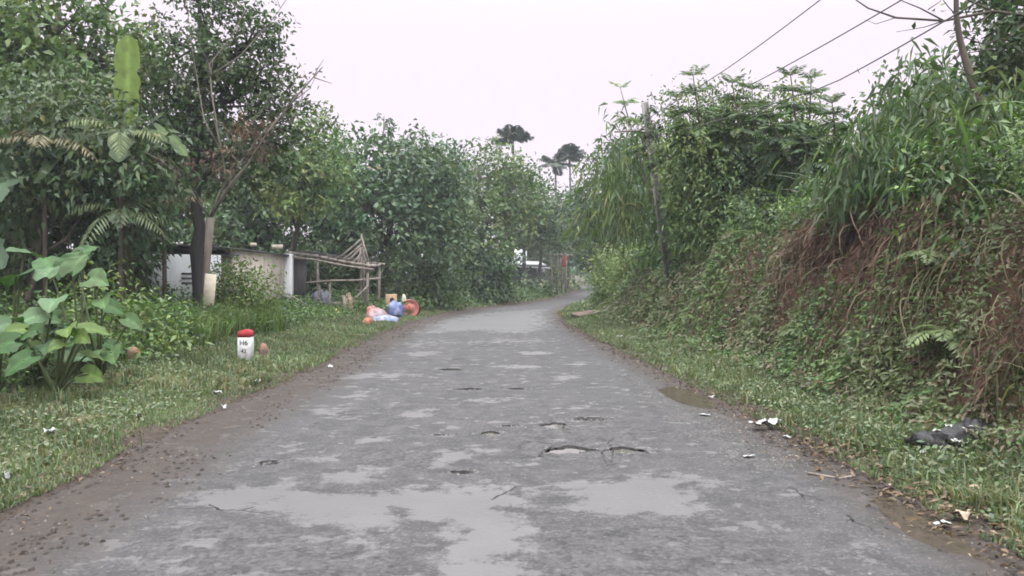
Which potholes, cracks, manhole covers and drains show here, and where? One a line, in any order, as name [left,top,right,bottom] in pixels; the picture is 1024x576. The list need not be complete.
pothole [602,444,658,456]
pothole [536,444,610,457]
crack [846,515,876,533]
pothole [252,459,285,467]
pothole [525,421,571,431]
